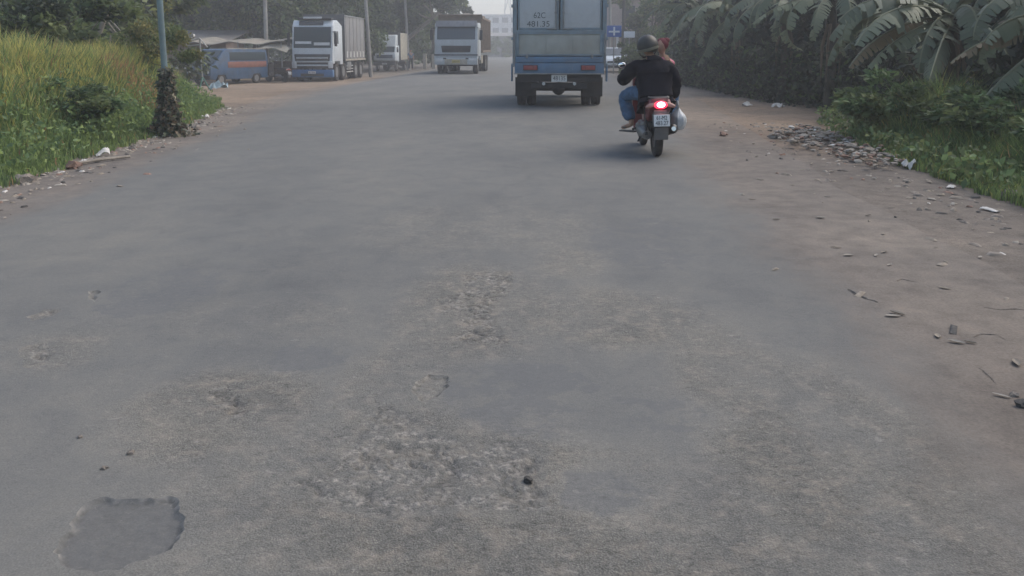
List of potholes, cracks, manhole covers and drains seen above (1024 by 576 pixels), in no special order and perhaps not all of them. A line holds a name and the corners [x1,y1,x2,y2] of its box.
pothole [411,374,451,403]
crack [280,400,554,523]
crack [431,271,515,349]
pothole [53,496,186,572]
